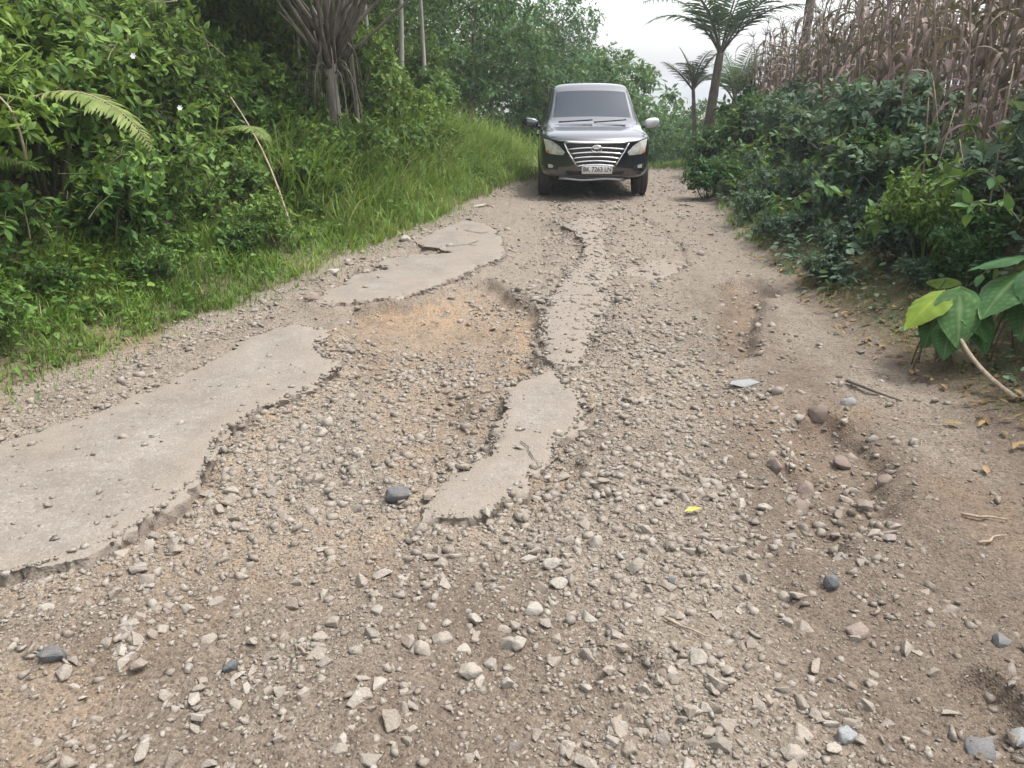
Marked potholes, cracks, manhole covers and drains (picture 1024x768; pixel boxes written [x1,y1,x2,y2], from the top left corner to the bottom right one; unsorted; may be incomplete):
pothole [337,278,544,490]
